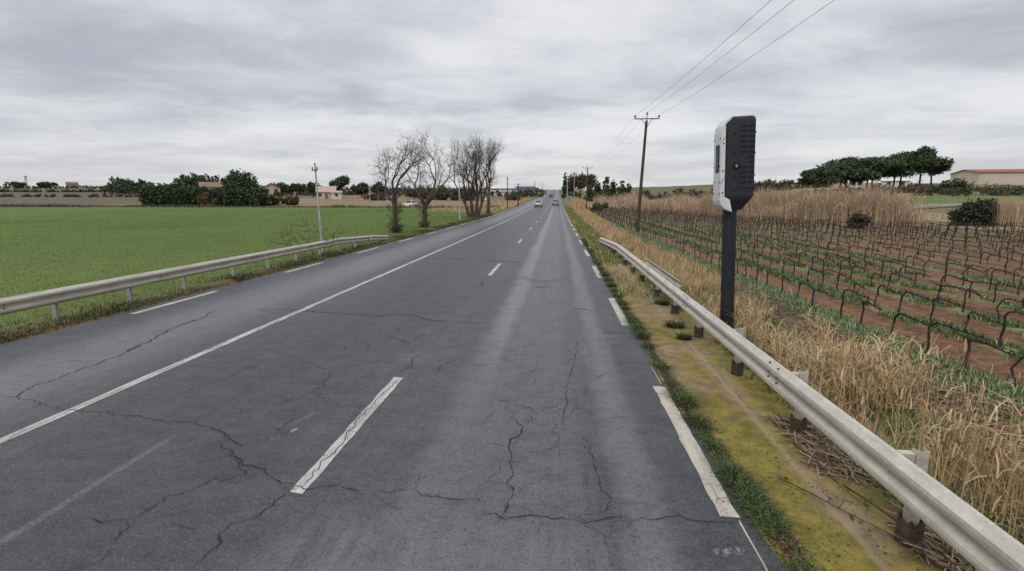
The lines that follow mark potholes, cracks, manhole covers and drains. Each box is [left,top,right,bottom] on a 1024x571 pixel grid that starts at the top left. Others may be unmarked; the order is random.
crack [8,308,741,565]
